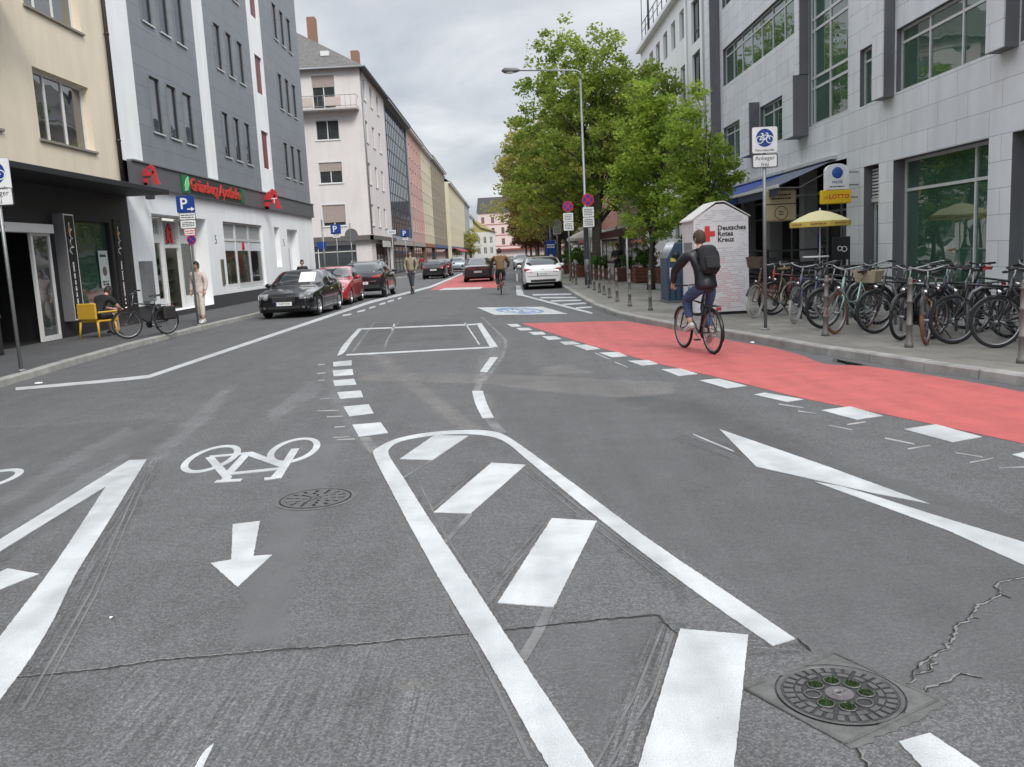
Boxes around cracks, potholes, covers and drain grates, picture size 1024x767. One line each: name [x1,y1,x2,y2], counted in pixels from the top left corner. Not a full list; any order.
crack [905,576,1024,692]
manhole cover [744,652,947,749]
manhole cover [274,488,356,510]
